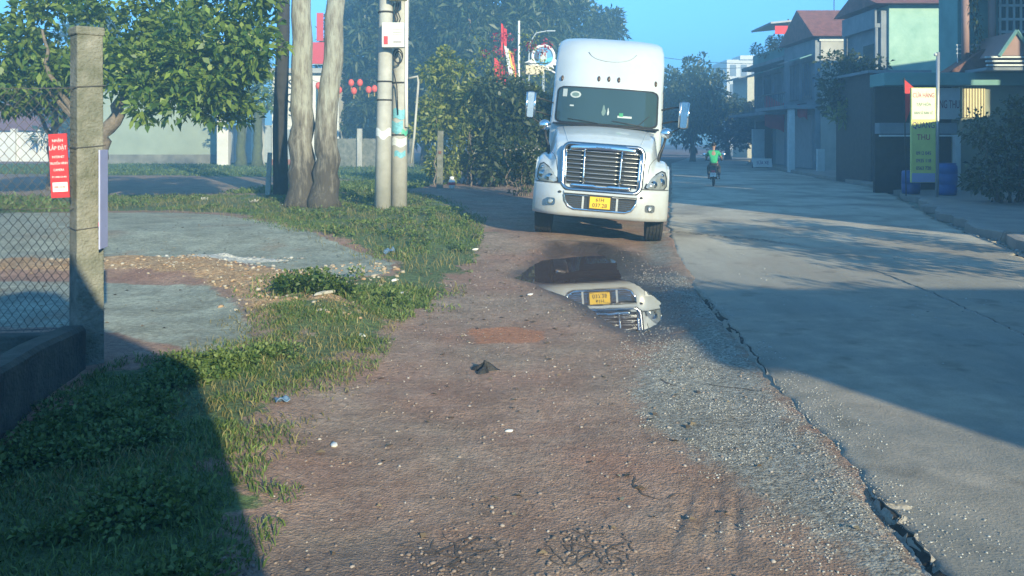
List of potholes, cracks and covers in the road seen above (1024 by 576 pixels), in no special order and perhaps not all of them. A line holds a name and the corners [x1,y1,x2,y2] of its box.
crack [546,528,631,574]
pothole [480,240,706,337]
crack [875,228,1024,337]
crack [673,290,784,393]
crack [632,477,681,499]
crack [869,487,949,576]
